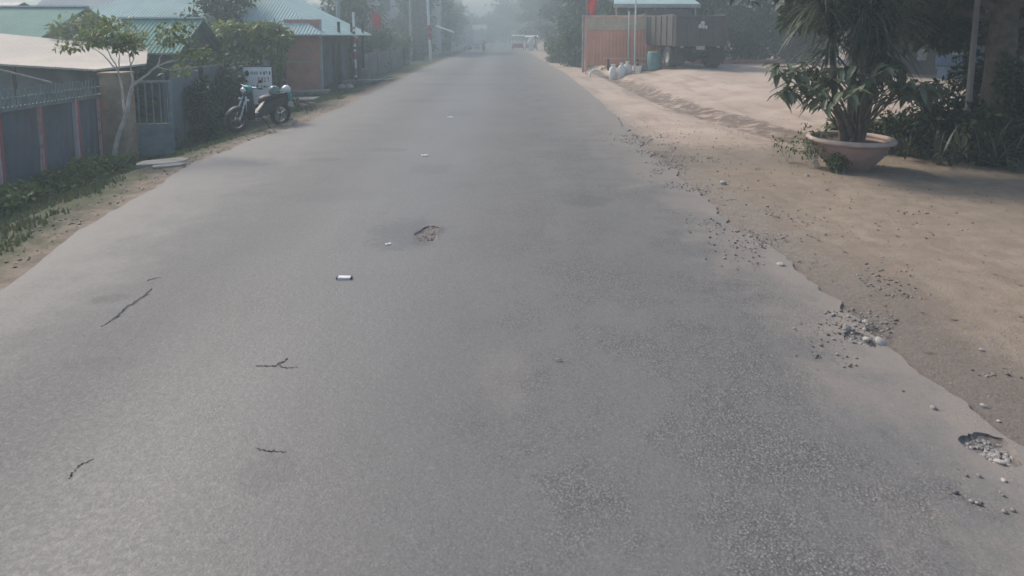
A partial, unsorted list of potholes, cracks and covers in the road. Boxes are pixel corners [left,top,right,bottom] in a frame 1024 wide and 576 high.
pothole [958,432,1022,467]
crack [100,277,161,327]
crack [256,358,297,369]
pothole [414,226,439,244]
